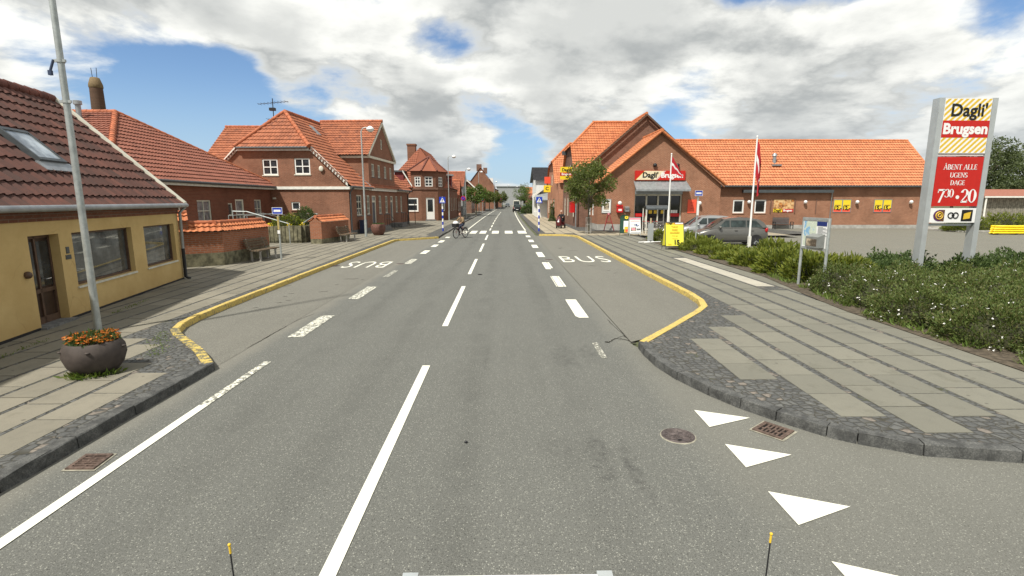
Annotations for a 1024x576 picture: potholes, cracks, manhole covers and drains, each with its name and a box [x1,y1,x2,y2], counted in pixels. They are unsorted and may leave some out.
drain grate [749,421,797,441]
manhole cover [660,428,697,444]
drain grate [61,453,117,471]
